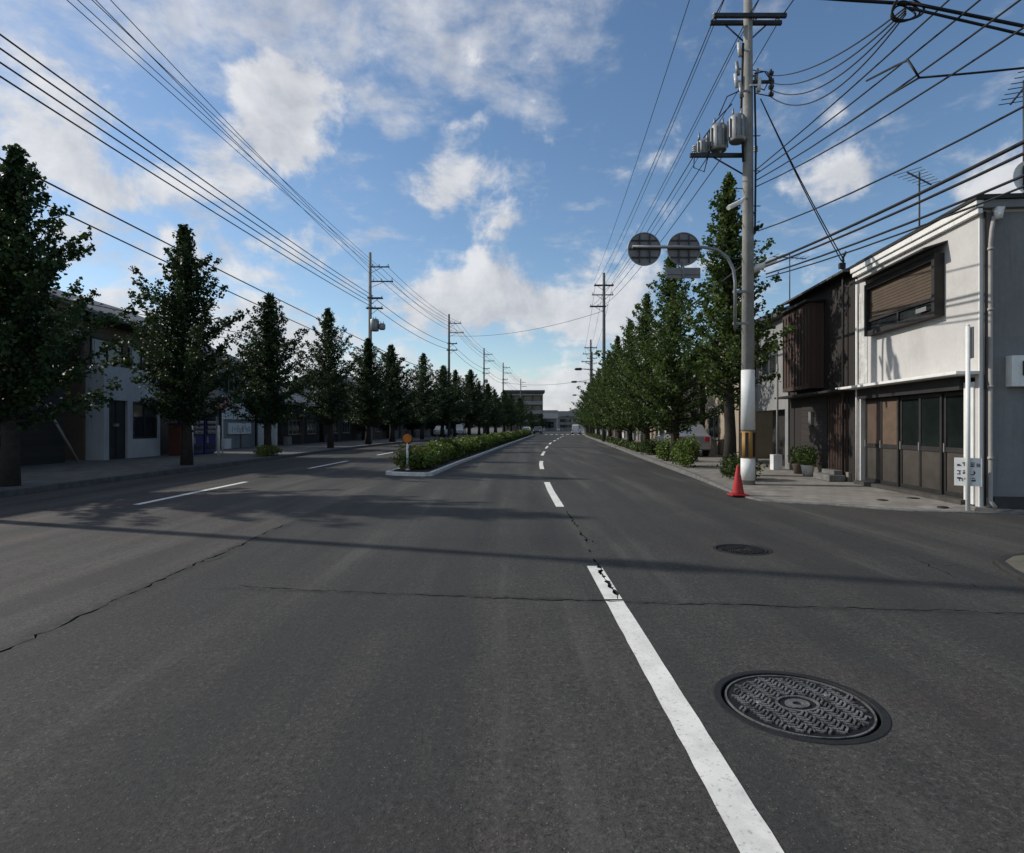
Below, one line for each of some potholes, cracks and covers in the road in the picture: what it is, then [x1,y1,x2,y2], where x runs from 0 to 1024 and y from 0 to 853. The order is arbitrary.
manhole cover [713,544,773,555]
manhole cover [713,670,892,745]
crack [0,525,283,652]
crack [240,510,1024,614]
